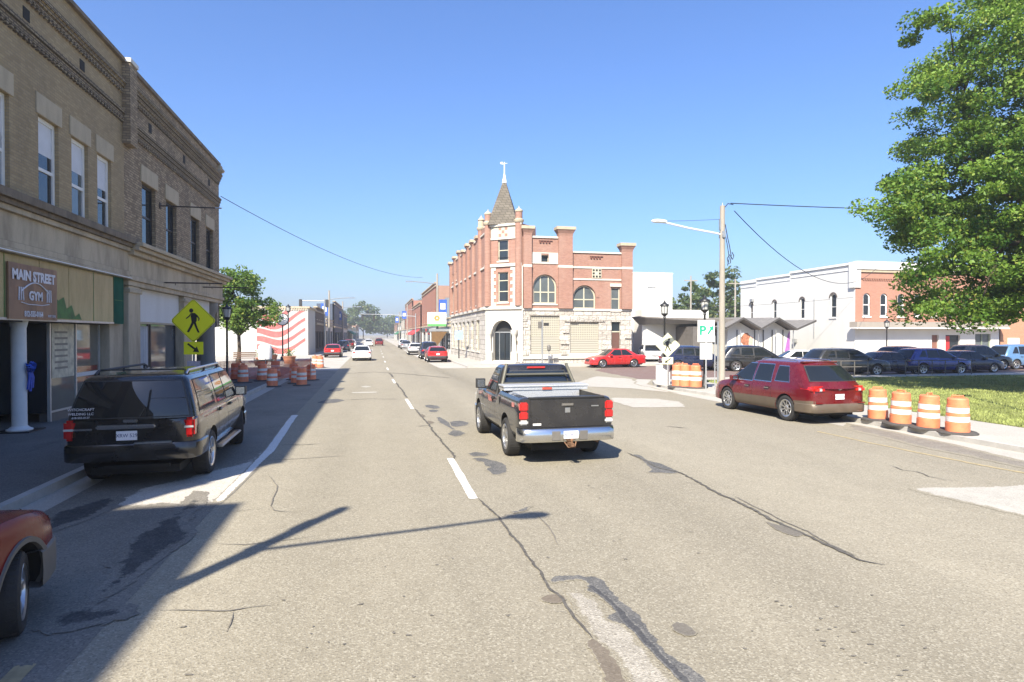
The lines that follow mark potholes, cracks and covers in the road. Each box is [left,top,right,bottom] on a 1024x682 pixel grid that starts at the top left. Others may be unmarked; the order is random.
crack [172,605,265,632]
crack [735,496,854,555]
crack [240,443,345,512]
